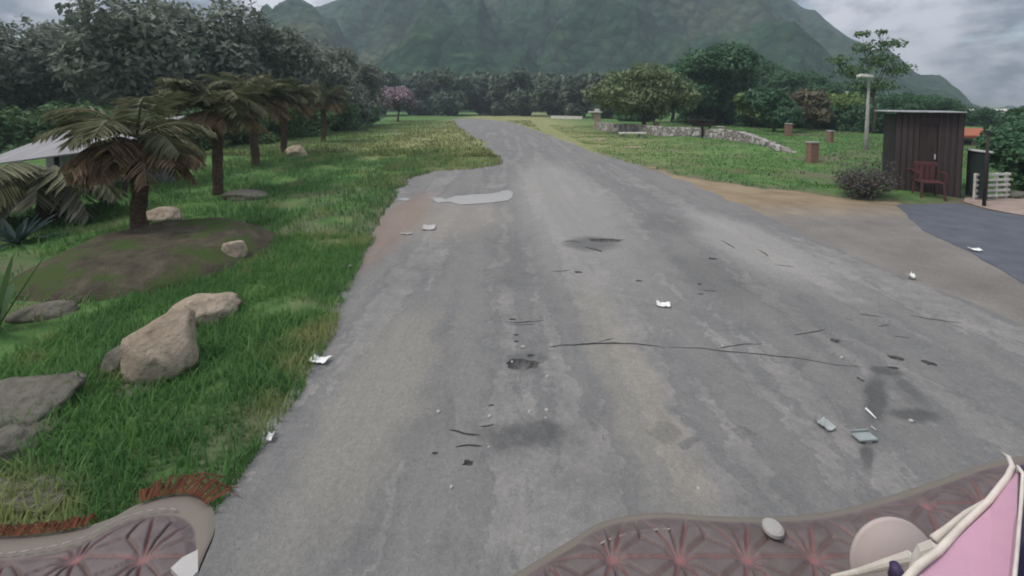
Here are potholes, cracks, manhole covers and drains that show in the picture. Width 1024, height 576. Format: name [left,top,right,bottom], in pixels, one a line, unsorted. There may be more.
crack [449,424,494,447]
crack [550,338,858,367]
pothole [506,358,540,371]
